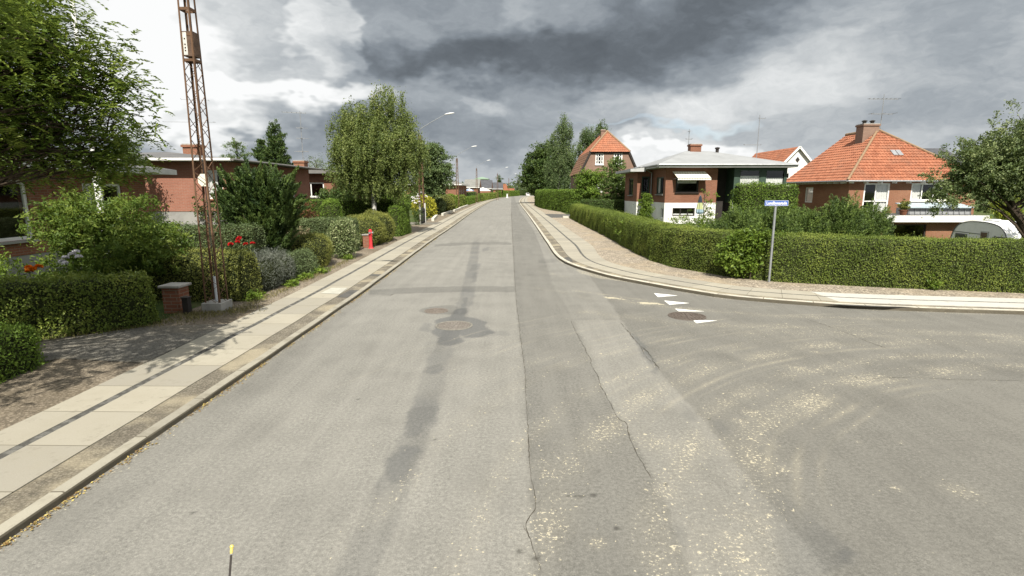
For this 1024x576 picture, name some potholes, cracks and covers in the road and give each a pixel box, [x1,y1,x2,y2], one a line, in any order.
crack [571,321,650,475]
manhole cover [668,312,707,321]
manhole cover [435,321,473,330]
